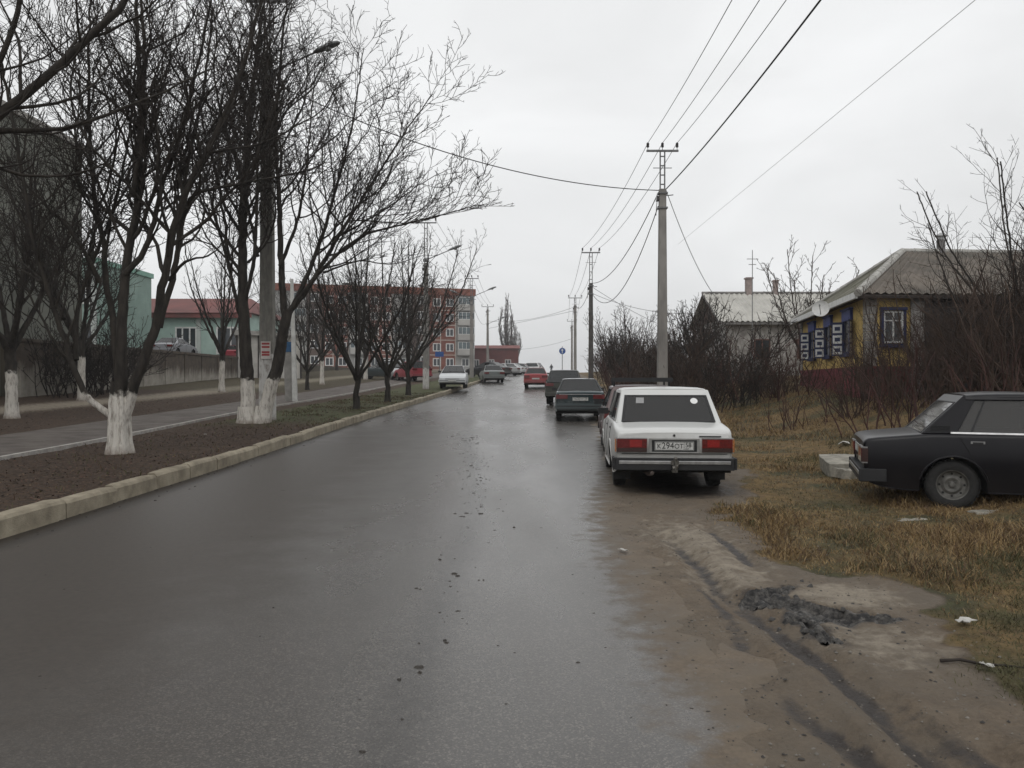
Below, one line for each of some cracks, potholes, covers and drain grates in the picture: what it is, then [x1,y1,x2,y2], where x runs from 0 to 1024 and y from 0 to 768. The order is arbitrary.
pothole [738,585,902,645]
